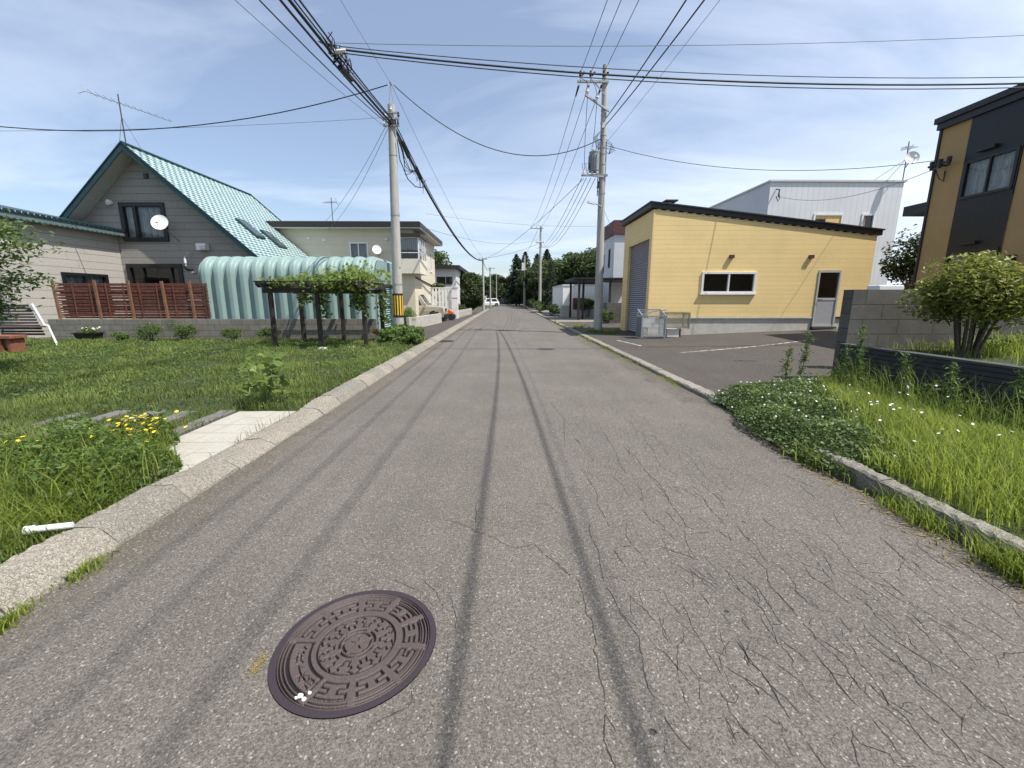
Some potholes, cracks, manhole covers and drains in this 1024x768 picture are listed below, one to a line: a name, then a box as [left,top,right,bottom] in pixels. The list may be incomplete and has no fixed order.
crack [533,364,1024,768]
manhole cover [267,590,436,720]
